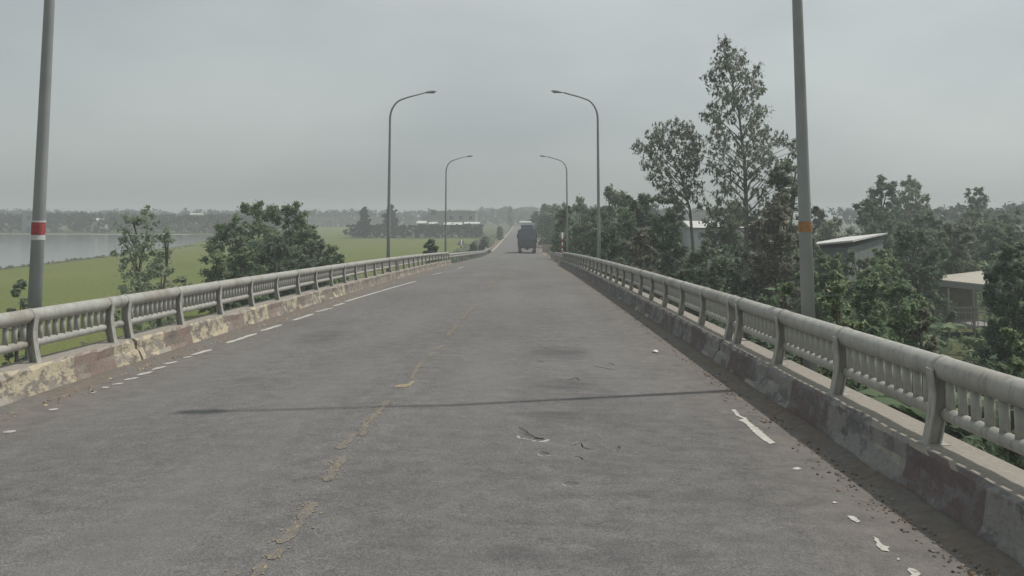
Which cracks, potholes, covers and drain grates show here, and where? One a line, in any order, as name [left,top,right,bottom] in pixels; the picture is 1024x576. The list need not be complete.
pothole [512,425,549,442]
